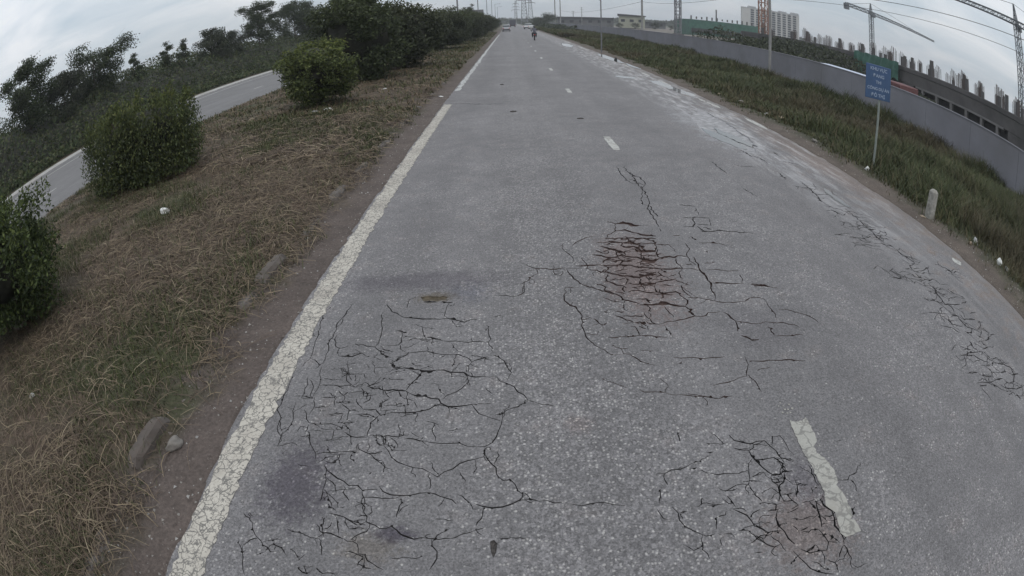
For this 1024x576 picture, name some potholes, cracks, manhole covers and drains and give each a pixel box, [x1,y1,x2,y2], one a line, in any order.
crack [796,184,1024,399]
crack [237,297,625,575]
crack [657,432,866,574]
crack [715,150,827,205]
crack [519,167,819,405]
